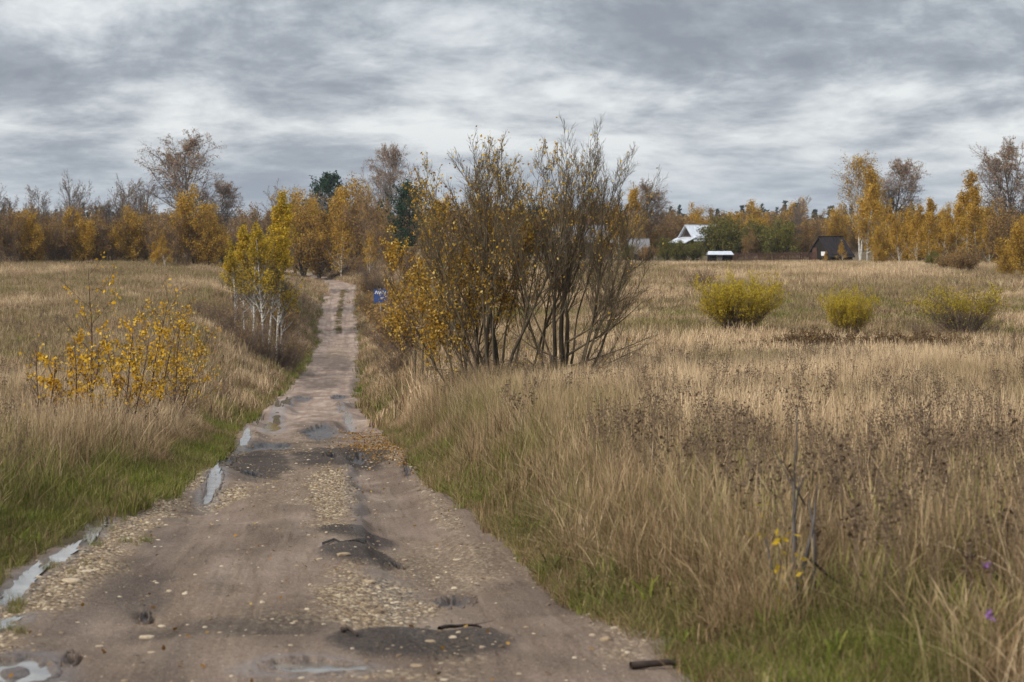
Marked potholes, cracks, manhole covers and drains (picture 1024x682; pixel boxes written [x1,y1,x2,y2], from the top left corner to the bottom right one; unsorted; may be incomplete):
pothole [429,594,478,610]
pothole [138,610,151,625]
pothole [62,650,79,668]
pothole [0,651,63,682]
pothole [216,456,238,466]
pothole [345,452,370,466]
pothole [298,421,342,442]
pothole [240,469,265,477]
pothole [202,464,224,507]
